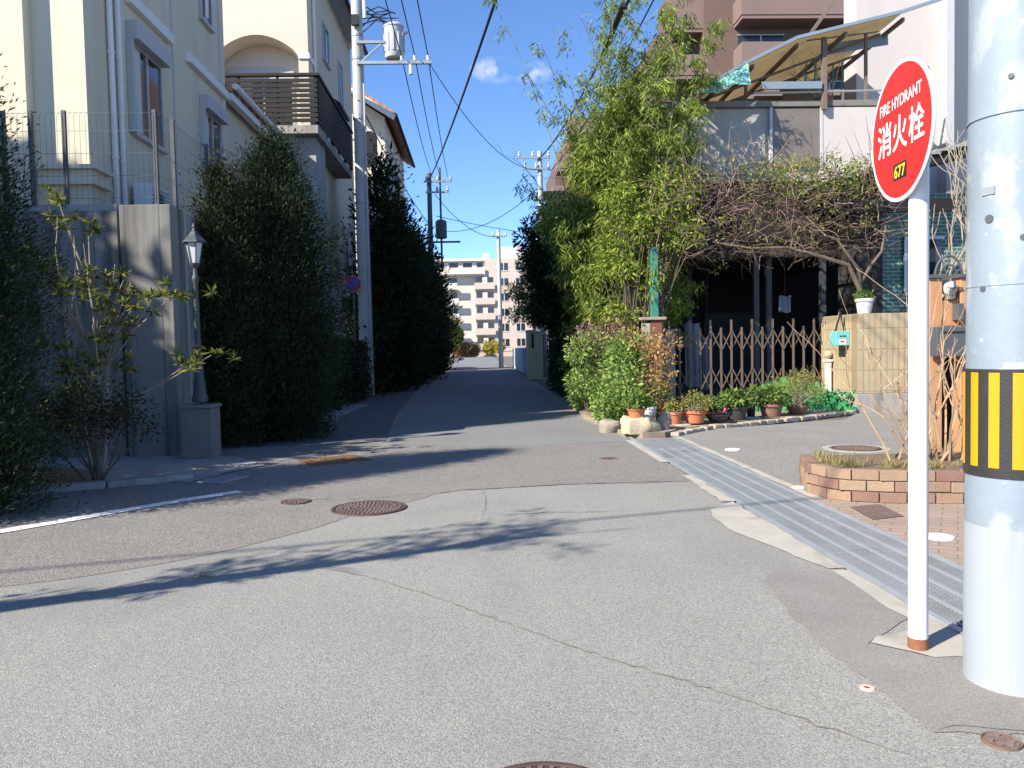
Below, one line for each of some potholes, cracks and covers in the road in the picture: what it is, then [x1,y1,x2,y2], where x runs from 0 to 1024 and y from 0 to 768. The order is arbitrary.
drain grate [630,437,963,636]
utility cover [980,731,1023,752]
manhole cover [331,500,407,517]
crack [307,566,923,760]
manhole cover [822,444,891,453]
